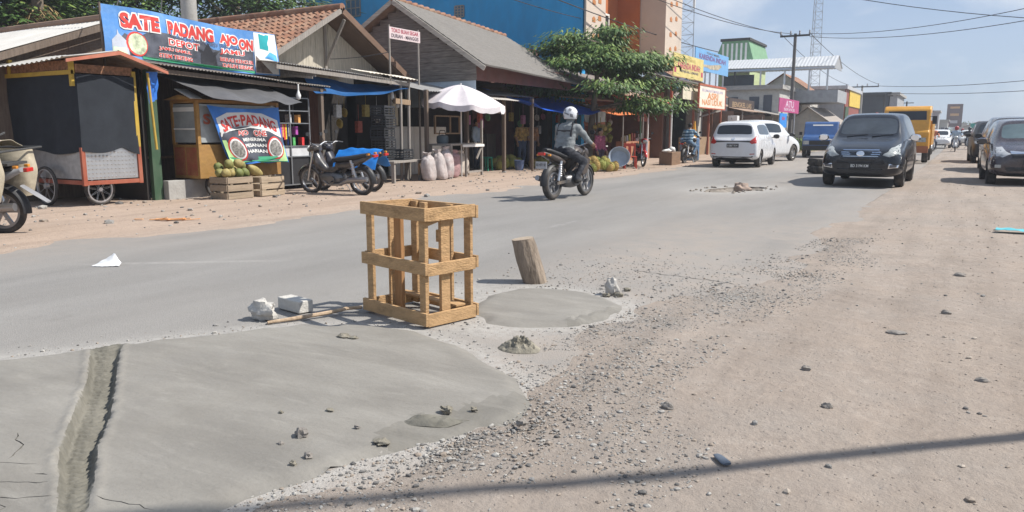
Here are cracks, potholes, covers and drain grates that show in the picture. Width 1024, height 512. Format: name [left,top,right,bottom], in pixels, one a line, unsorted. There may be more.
crack [0,433,47,510]
pothole [689,185,778,193]
